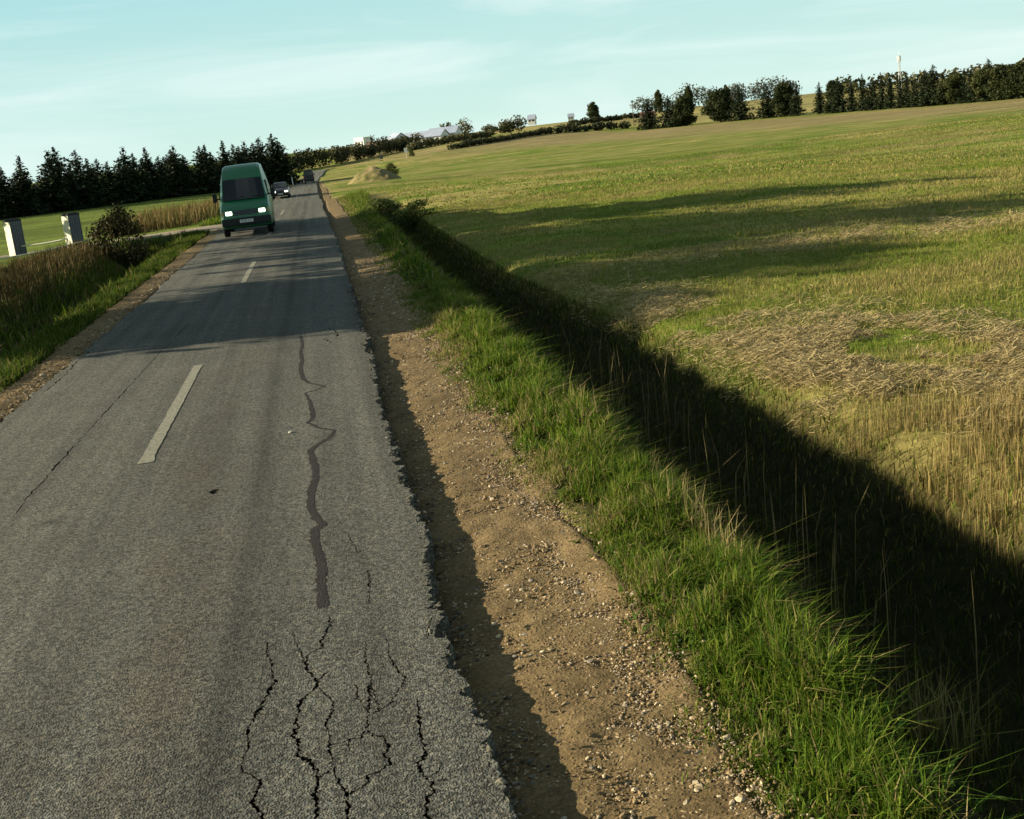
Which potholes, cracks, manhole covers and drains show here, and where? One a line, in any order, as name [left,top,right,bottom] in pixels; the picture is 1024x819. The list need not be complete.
crack [240,616,450,819]
crack [16,323,190,514]
